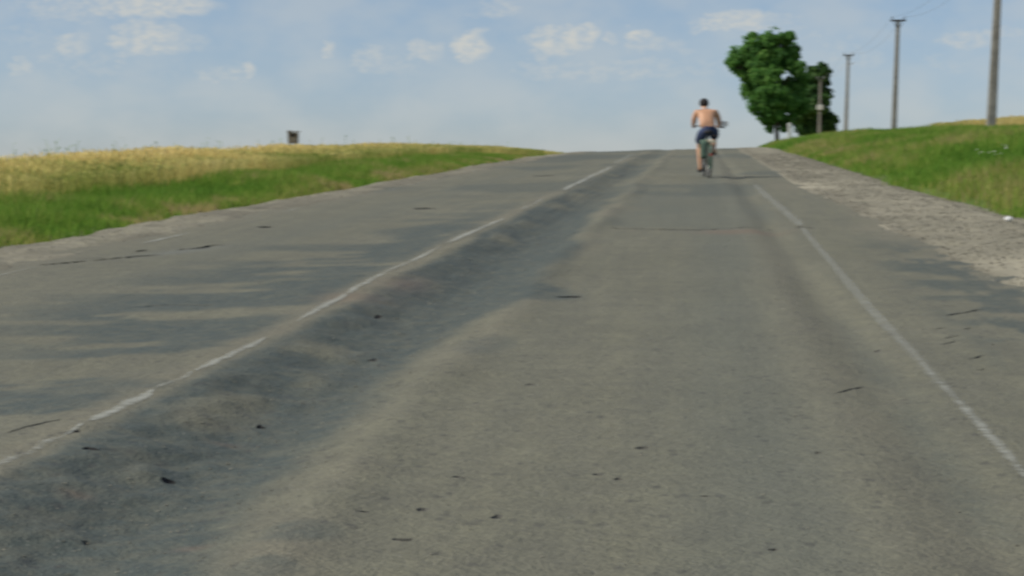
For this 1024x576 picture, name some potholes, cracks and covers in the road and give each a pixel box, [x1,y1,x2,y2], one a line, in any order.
crack [8,419,60,433]
crack [42,250,154,265]
crack [938,305,985,371]
